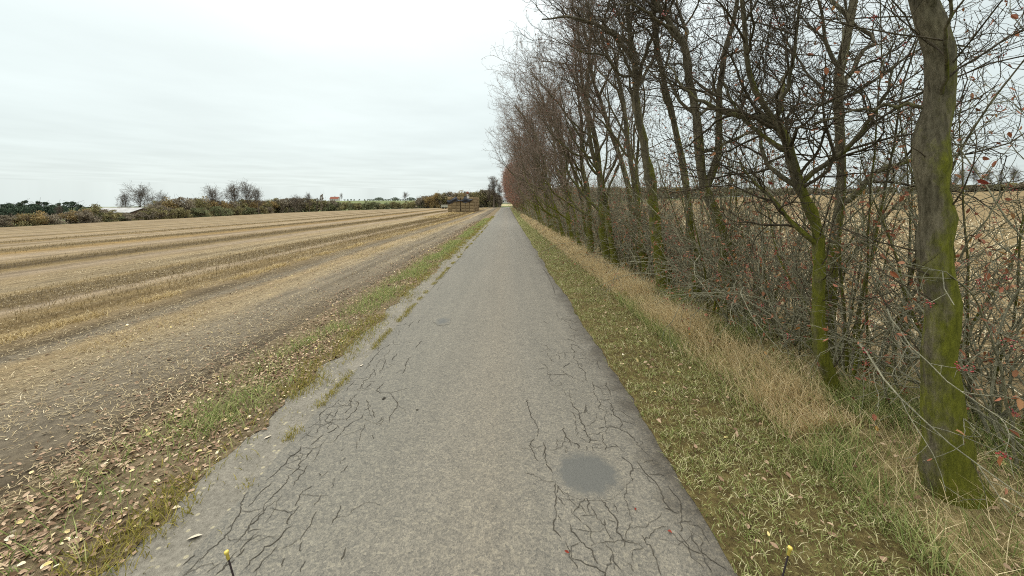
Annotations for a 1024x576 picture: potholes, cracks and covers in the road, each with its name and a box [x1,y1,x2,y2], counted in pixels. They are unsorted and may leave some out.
crack [521,315,726,576]
crack [183,319,421,576]
